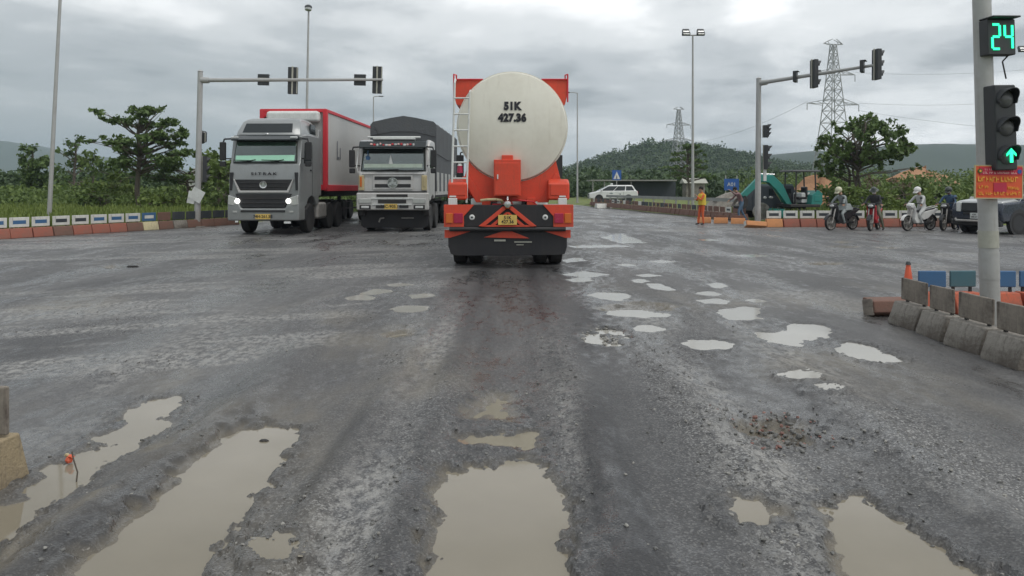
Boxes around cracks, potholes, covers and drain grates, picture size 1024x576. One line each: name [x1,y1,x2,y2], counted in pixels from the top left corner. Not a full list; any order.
pothole [382,303,439,314]
pothole [802,481,1024,576]
pothole [775,365,825,380]
pothole [672,336,753,350]
pothole [439,425,551,452]
pothole [446,386,531,423]
pothole [825,340,912,364]
pothole [556,323,640,348]
pothole [703,484,807,531]
pothole [599,233,651,244]
pothole [710,404,853,453]
pothole [405,450,591,576]
